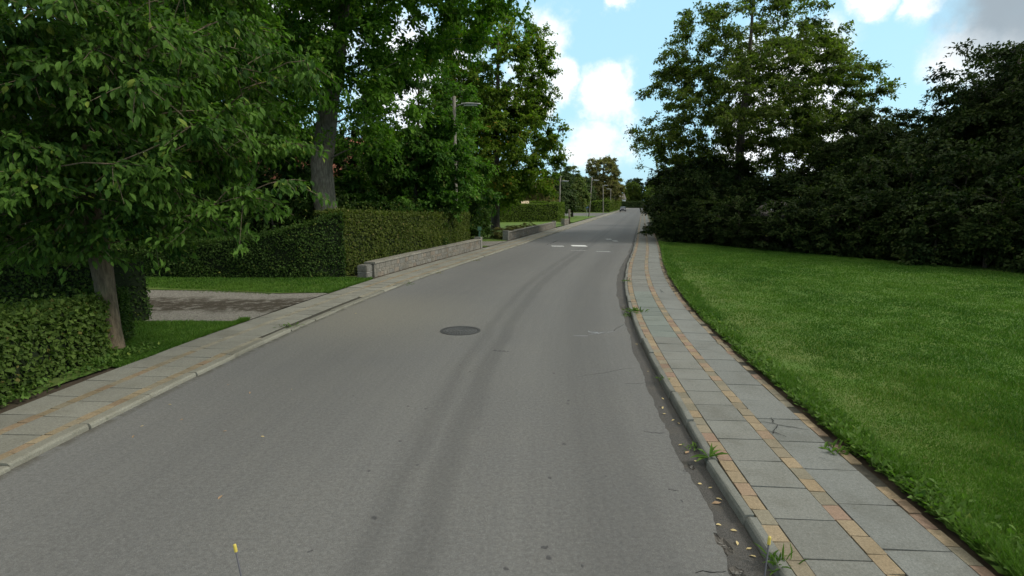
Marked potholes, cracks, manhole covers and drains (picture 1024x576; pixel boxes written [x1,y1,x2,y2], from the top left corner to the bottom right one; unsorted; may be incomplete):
manhole cover [440,326,481,335]
